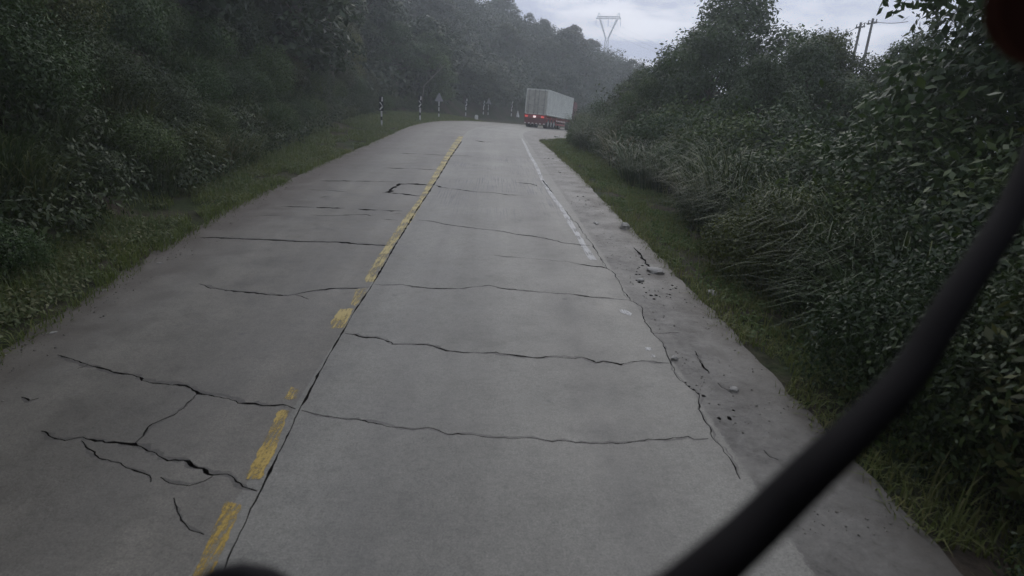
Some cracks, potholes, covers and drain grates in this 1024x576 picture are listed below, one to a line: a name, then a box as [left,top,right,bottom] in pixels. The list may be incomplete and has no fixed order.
crack [42,355,295,535]
crack [263,153,552,220]
crack [201,284,358,299]
crack [305,211,740,479]
